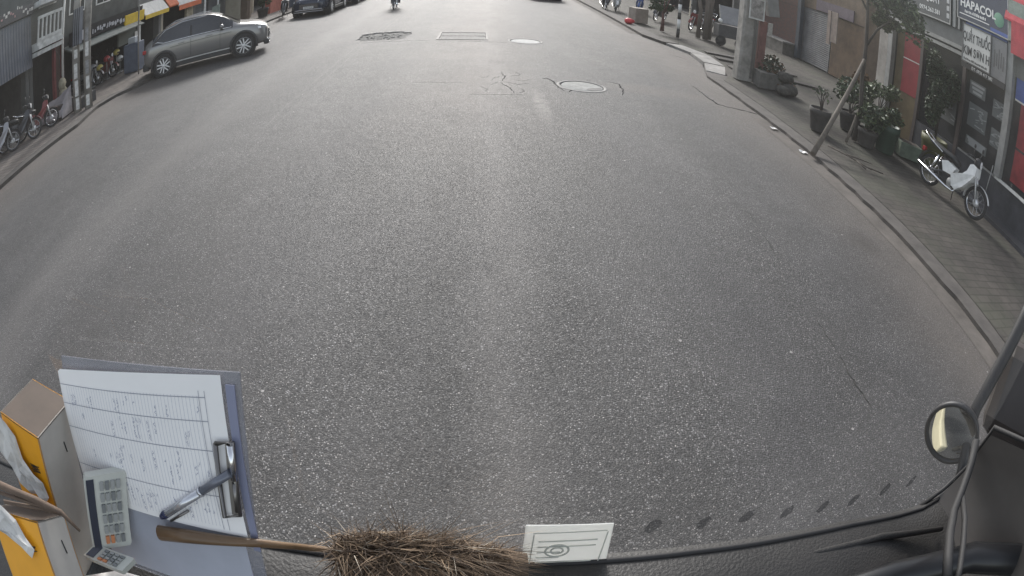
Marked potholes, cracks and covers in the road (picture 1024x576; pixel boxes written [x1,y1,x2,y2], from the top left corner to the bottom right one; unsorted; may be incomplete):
crack [431,72,529,95]
manhole cover [556,80,608,93]
manhole cover [436,32,488,40]
crack [814,315,872,407]
